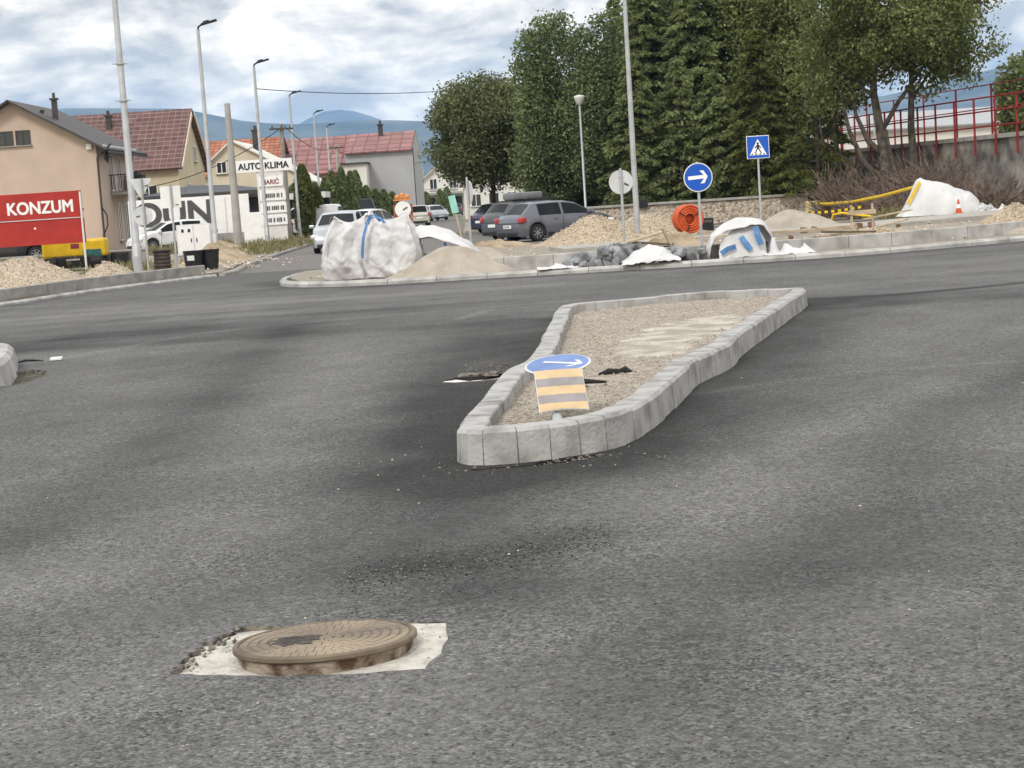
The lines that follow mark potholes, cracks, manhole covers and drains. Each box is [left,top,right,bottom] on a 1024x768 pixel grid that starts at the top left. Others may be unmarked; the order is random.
pothole [443,358,517,382]
pothole [12,369,47,385]
manhole cover [169,619,448,676]
